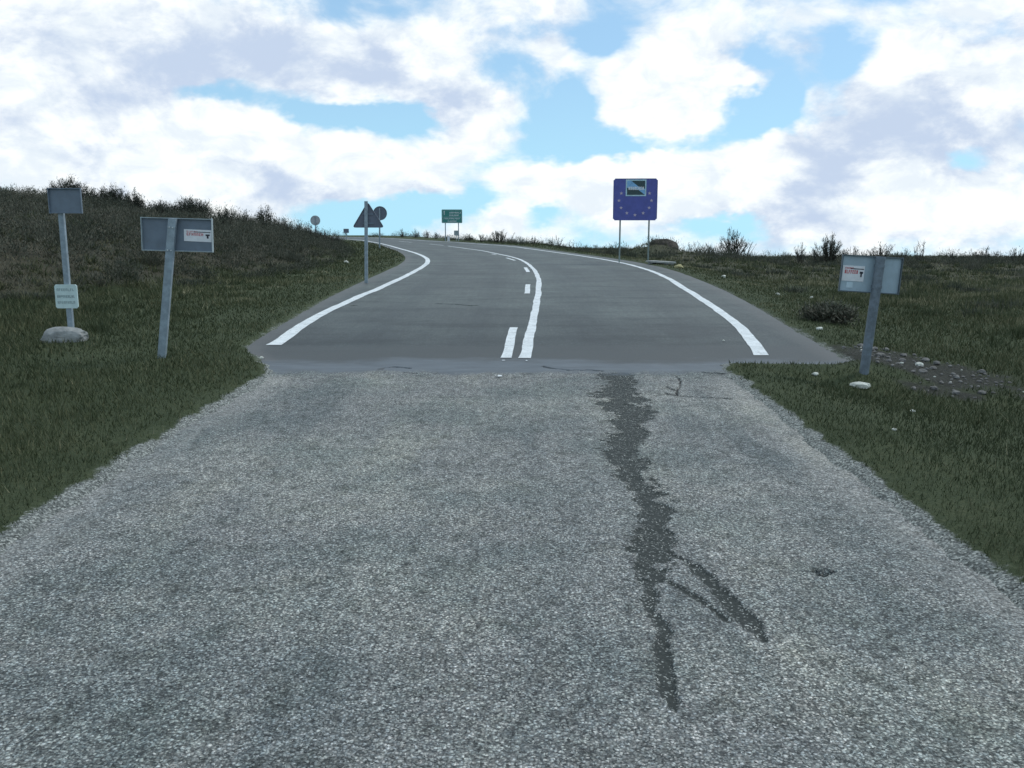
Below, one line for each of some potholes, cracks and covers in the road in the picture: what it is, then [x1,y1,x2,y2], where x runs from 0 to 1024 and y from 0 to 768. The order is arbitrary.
crack [543,366,769,711]
pothole [808,567,838,577]
